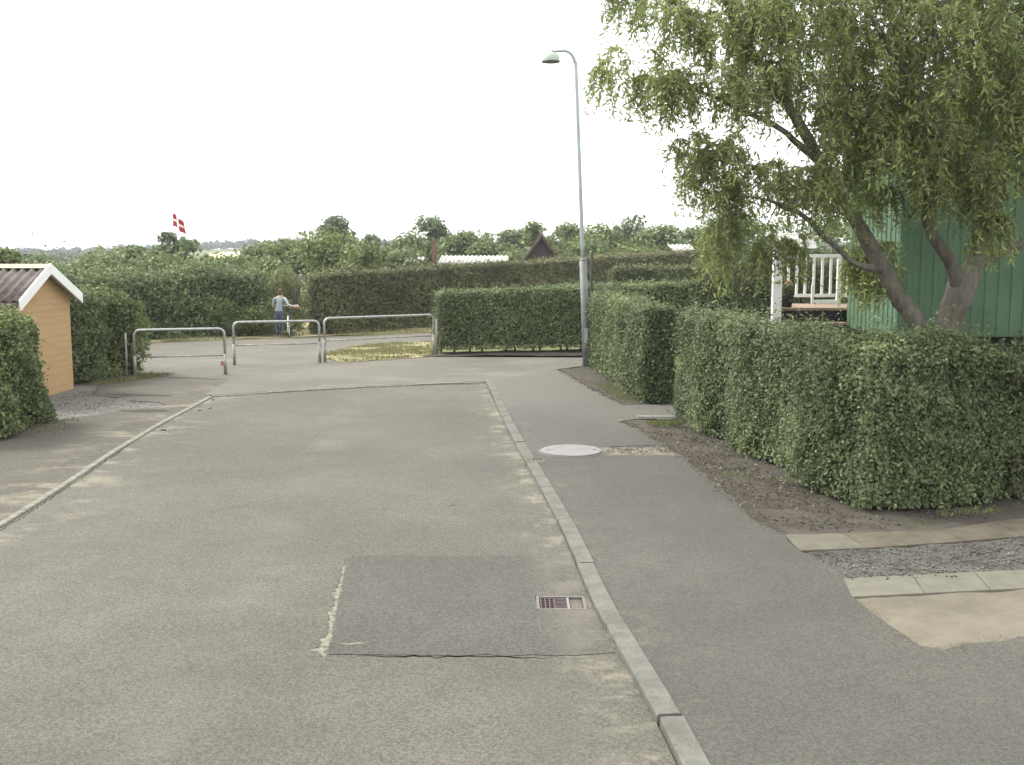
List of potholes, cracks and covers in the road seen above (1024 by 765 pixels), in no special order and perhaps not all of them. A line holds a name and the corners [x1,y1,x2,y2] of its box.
drain grate [536,596,588,610]
manhole cover [538,444,604,458]
